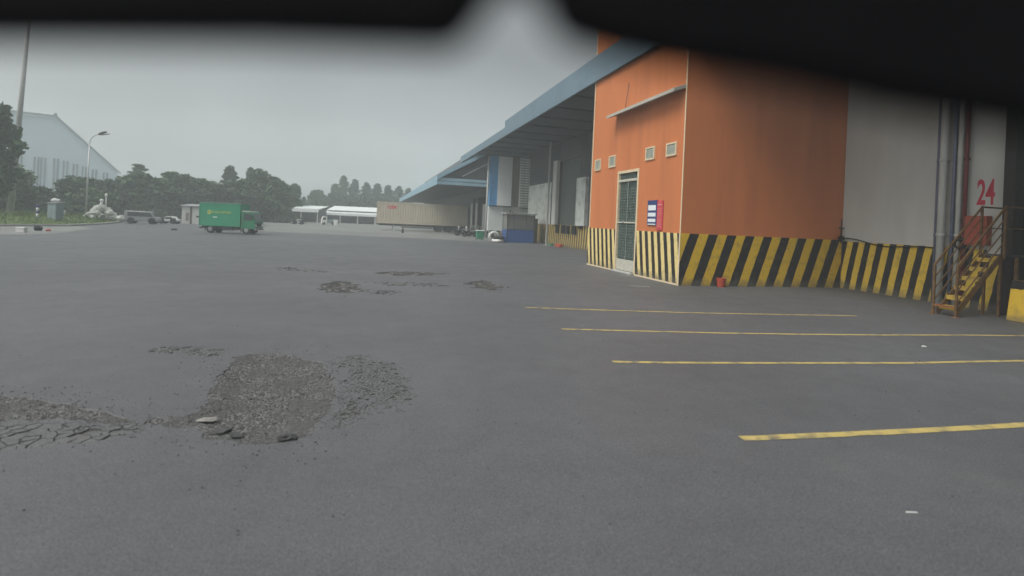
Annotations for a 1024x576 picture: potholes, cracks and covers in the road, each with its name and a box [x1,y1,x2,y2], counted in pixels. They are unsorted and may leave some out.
pothole [302,281,387,295]
pothole [0,381,201,450]
crack [0,420,144,450]
pothole [439,278,509,293]
pothole [81,342,379,470]
